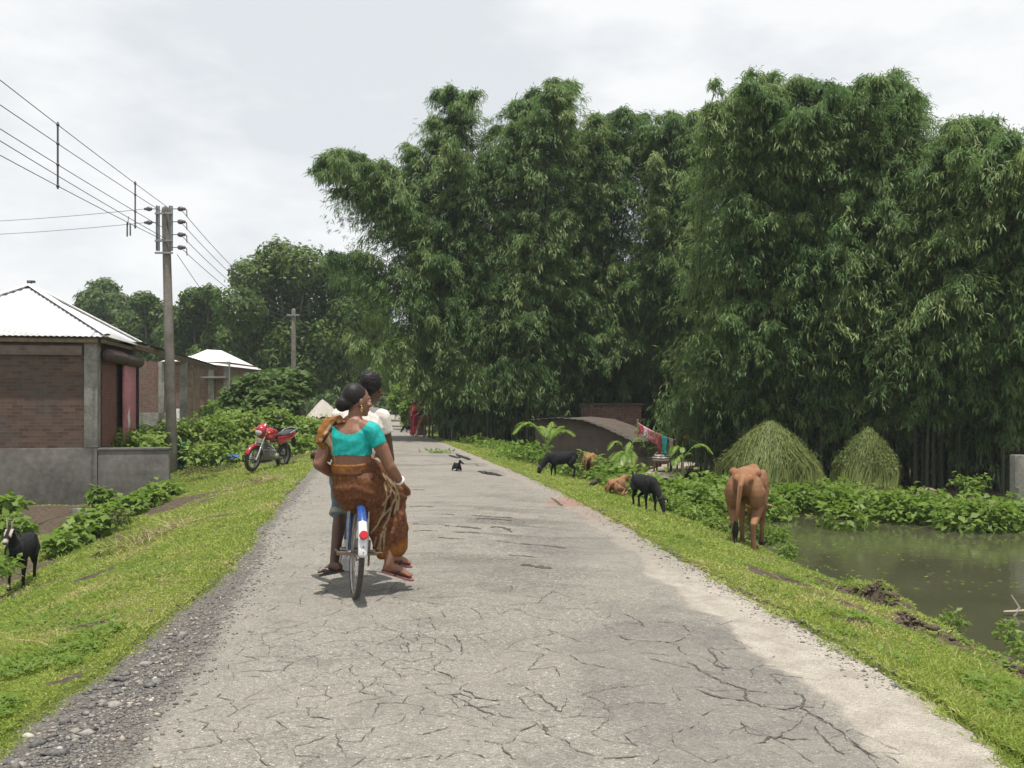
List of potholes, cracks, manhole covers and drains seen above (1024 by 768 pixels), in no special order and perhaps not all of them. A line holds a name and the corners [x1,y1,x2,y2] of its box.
crack [170,536,901,768]
crack [410,489,564,568]
